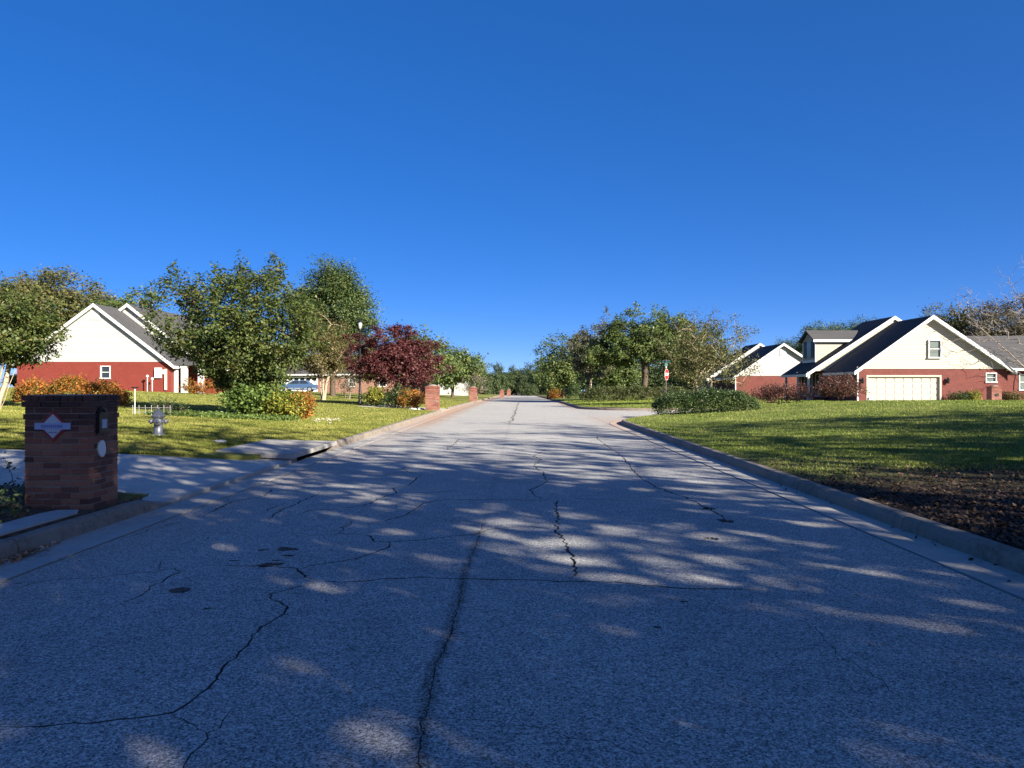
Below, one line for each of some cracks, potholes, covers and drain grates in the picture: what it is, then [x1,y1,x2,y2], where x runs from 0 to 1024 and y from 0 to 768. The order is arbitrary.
crack [807,622,909,709]
crack [597,436,724,518]
crack [0,451,755,768]
